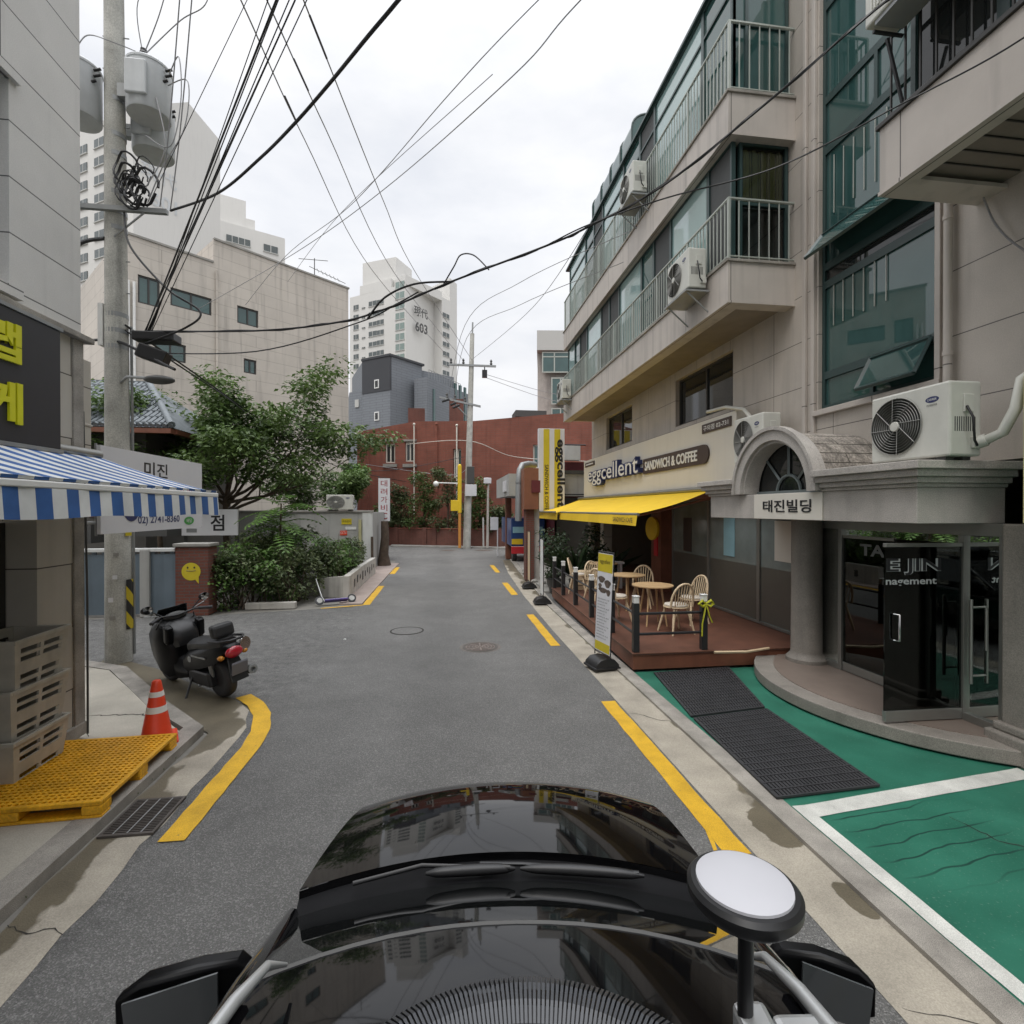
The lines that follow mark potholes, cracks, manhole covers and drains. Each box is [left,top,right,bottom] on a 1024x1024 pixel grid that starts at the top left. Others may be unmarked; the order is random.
crack [7,925,62,934]
manhole cover [460,642,501,653]
manhole cover [390,627,424,635]
drain grate [96,796,186,839]
